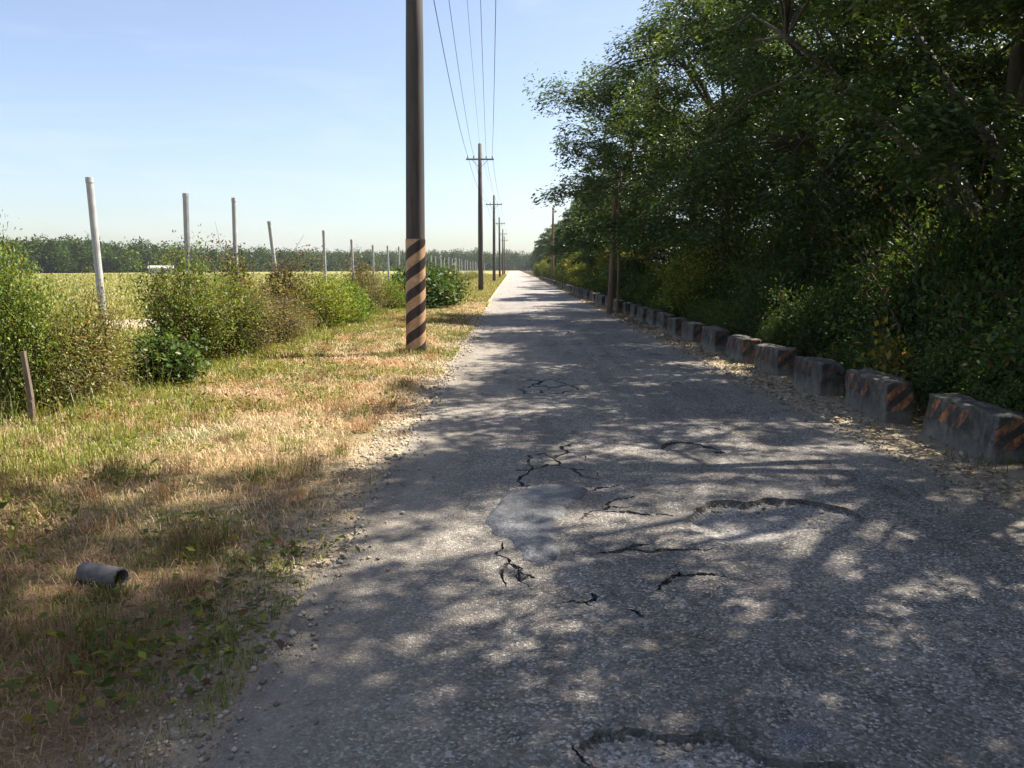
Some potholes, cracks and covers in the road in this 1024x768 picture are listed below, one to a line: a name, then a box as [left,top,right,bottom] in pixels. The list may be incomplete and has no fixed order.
crack [661,441,725,454]
crack [516,443,673,520]
pothole [579,727,860,768]
crack [517,378,593,394]
crack [562,593,599,608]
crack [592,544,713,555]
crack [494,541,539,589]
crack [626,572,732,619]
